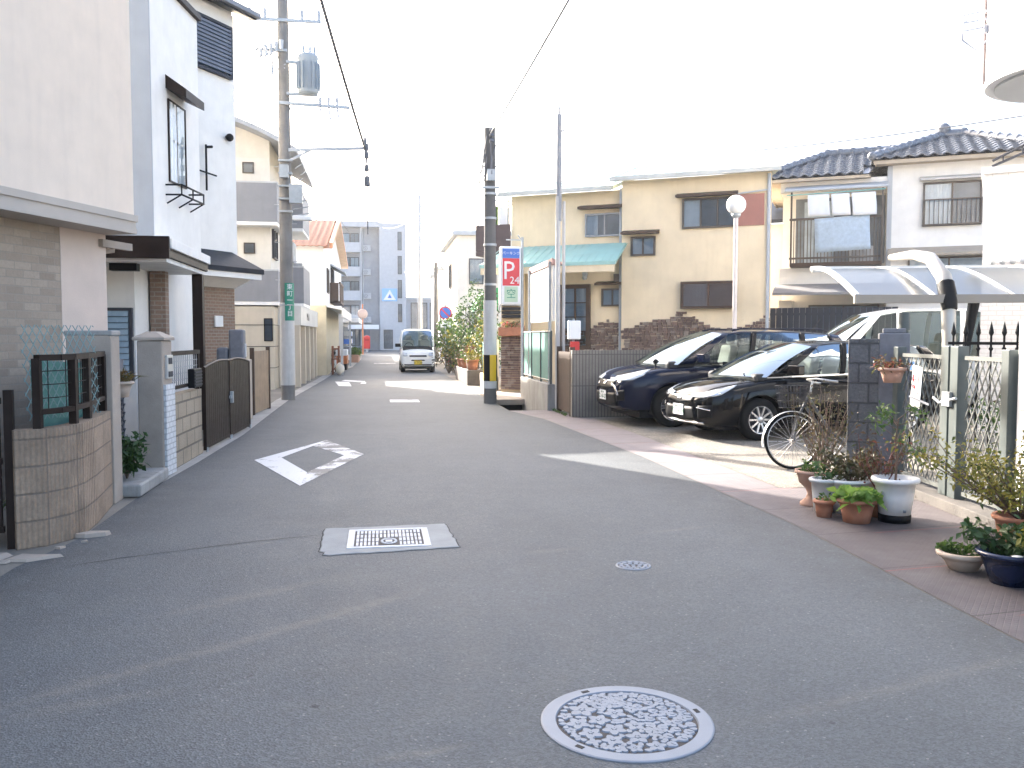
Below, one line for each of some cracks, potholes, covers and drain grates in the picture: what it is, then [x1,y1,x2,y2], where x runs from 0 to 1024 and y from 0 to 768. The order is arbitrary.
manhole cover [318,524,461,556]
manhole cover [616,561,651,571]
manhole cover [541,686,715,763]
